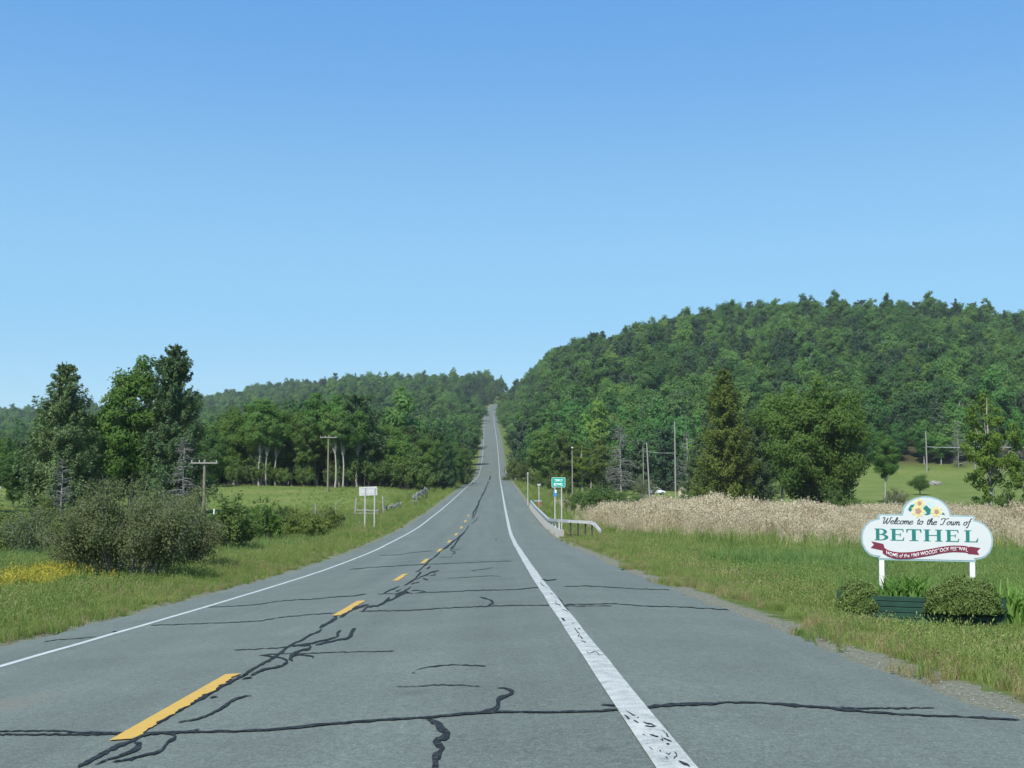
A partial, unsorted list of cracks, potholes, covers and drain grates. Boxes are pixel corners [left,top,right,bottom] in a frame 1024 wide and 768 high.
crack [159,549,729,654]
